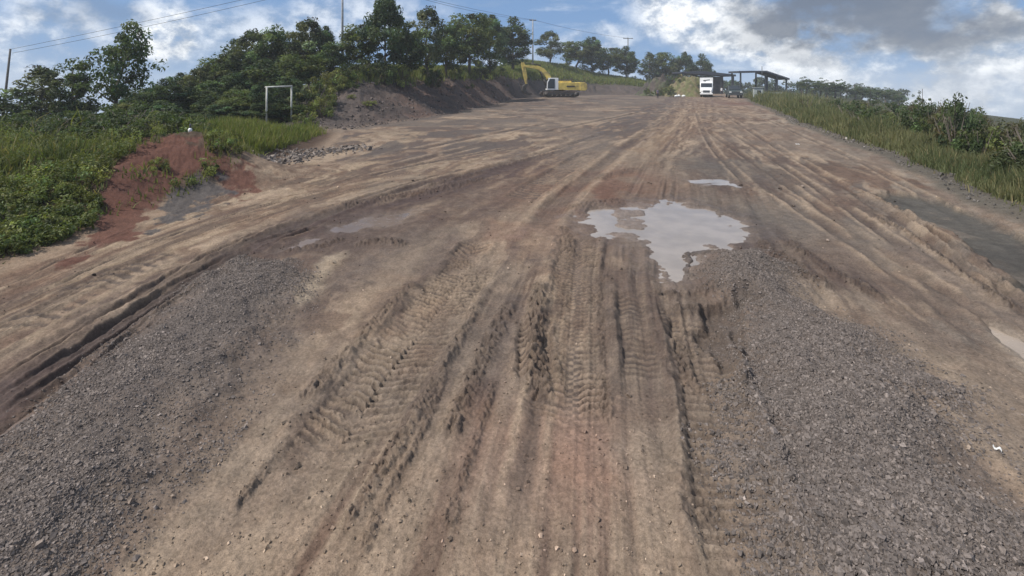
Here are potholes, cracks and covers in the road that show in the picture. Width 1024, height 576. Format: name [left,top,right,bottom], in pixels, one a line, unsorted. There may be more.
pothole [563,196,765,292]
